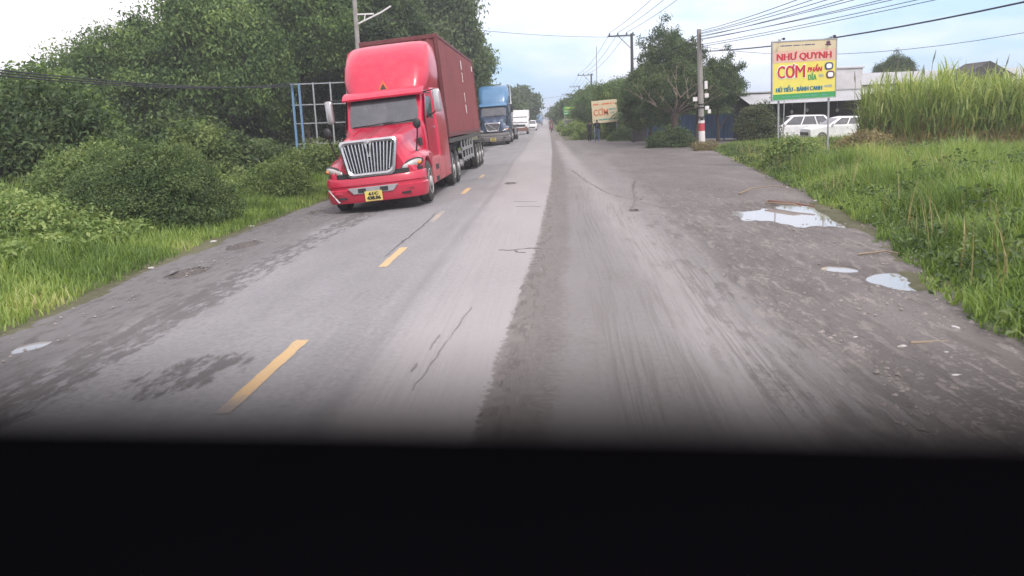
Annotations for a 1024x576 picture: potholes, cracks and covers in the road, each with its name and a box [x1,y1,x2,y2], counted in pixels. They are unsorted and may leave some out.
pothole [165,267,211,280]
crack [411,306,472,386]
pothole [225,240,260,250]
